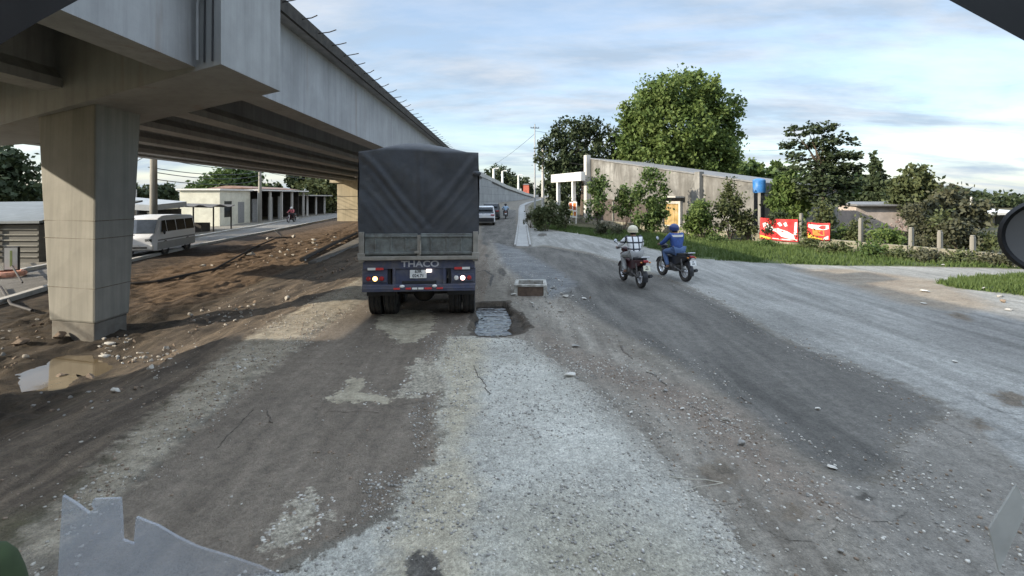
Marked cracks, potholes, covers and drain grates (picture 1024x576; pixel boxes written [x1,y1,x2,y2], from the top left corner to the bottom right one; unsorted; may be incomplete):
manhole cover [514,279,547,296]
pothole [455,299,548,341]
crack [620,345,667,385]
crack [216,407,273,449]
